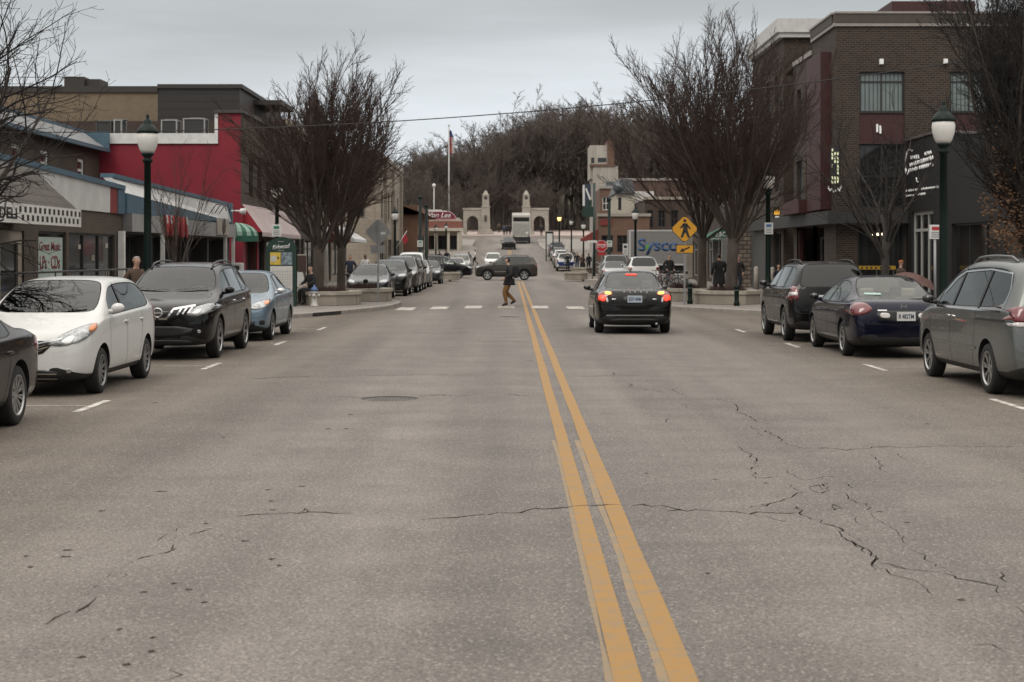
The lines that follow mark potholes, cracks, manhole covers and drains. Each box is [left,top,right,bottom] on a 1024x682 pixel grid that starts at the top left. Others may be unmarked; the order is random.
crack [46,526,212,625]
crack [421,404,1024,626]
crack [244,508,337,516]
